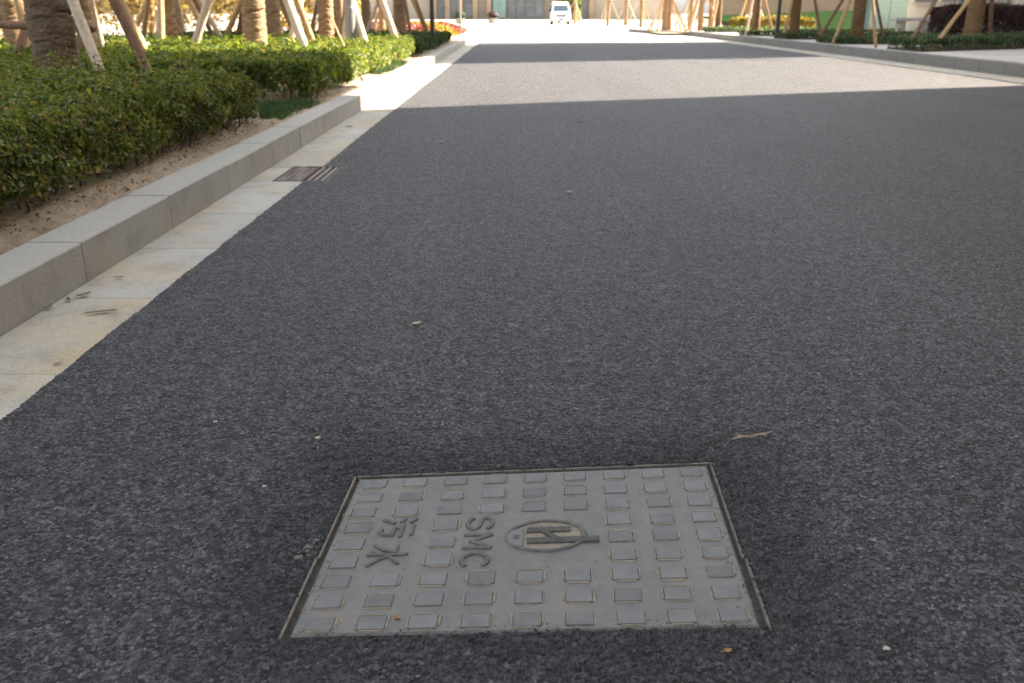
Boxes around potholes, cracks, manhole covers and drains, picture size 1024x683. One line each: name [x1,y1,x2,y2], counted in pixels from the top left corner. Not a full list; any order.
manhole cover [278,462,771,640]
drain grate [271,166,344,182]
